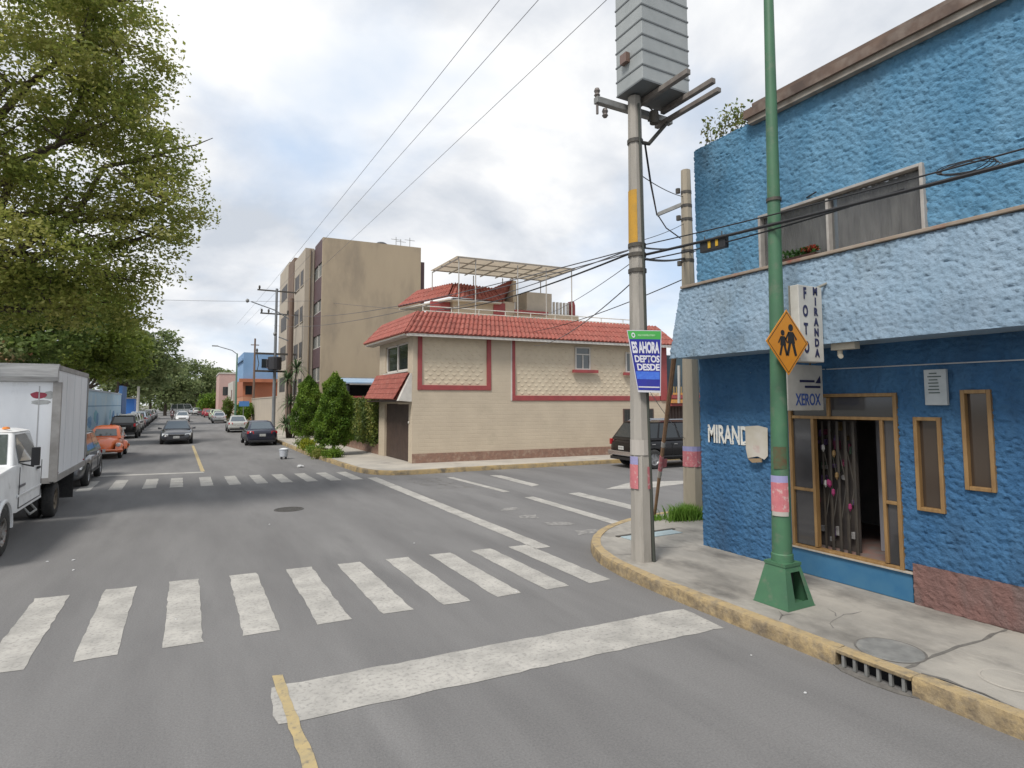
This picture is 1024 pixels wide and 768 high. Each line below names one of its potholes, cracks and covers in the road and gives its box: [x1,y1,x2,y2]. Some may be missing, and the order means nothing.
utility cover [615,528,683,540]
manhole cover [977,668,1024,692]
drain grate [833,646,920,699]
manhole cover [854,637,928,663]
